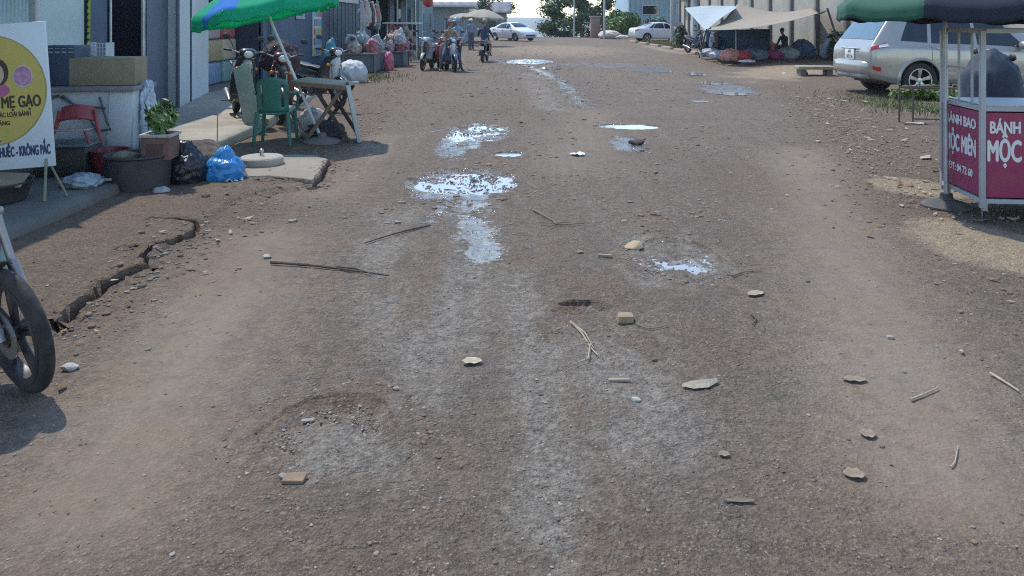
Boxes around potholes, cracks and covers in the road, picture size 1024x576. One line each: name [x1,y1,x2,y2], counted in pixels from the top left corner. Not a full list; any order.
pothole [385,166,542,201]
pothole [434,121,520,146]
pothole [226,381,428,479]
pothole [545,298,612,315]
pothole [624,234,740,282]
pothole [584,123,672,131]
crack [47,216,208,329]
